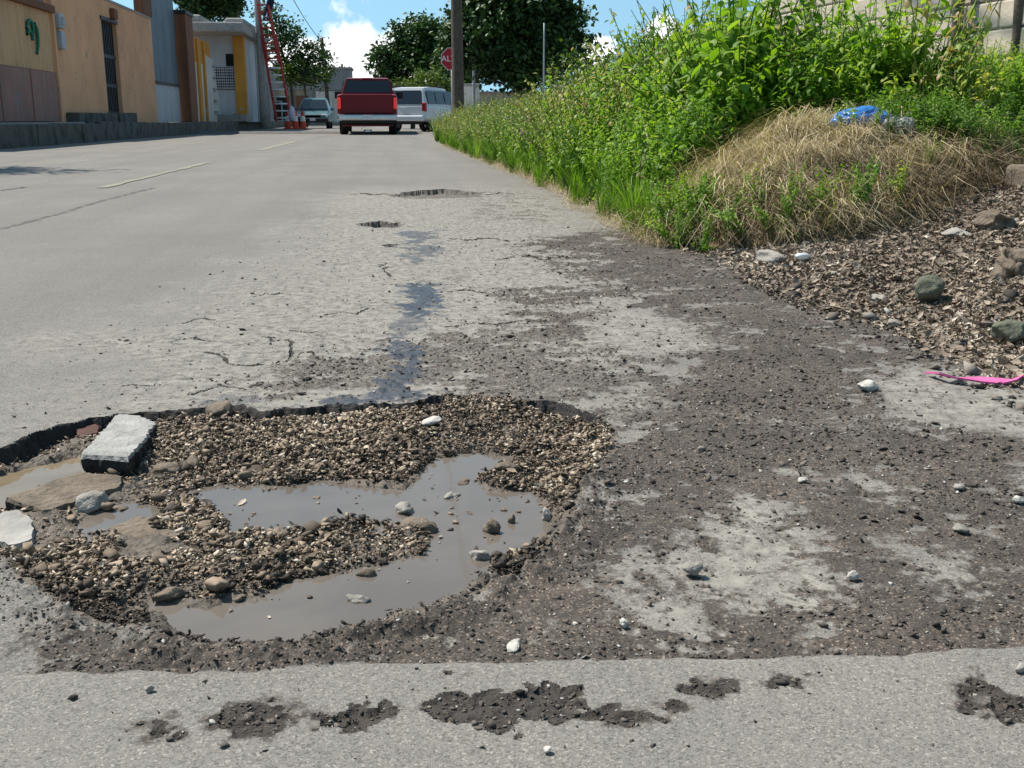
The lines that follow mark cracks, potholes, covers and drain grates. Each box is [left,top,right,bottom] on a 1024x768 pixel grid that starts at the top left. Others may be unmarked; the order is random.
crack [169,308,369,395]
pothole [0,394,621,647]
pothole [388,189,486,199]
